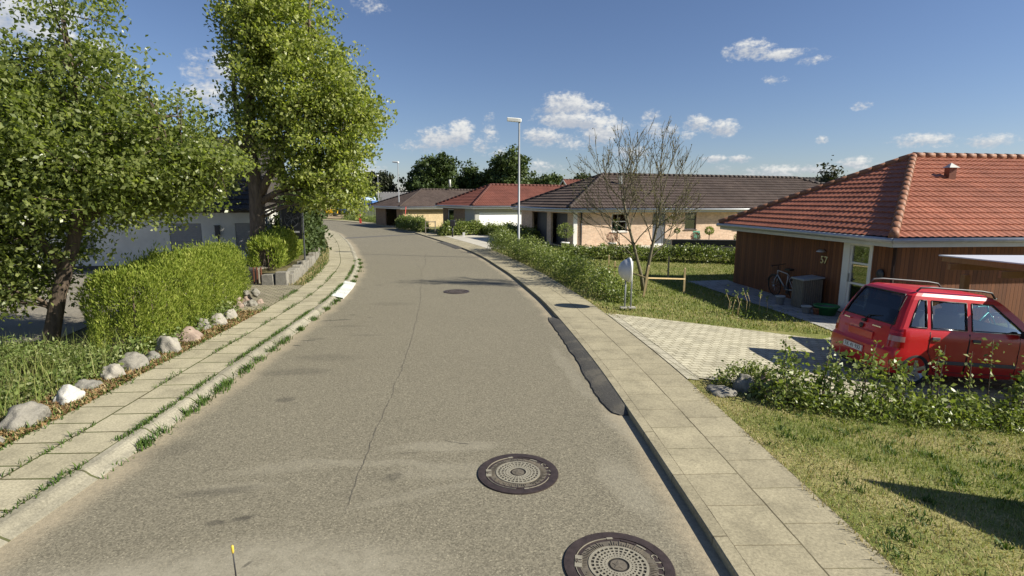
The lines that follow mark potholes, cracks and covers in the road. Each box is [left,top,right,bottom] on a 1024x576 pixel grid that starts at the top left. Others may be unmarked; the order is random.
manhole cover [478,454,559,495]
crack [347,267,422,506]
manhole cover [564,532,676,576]
